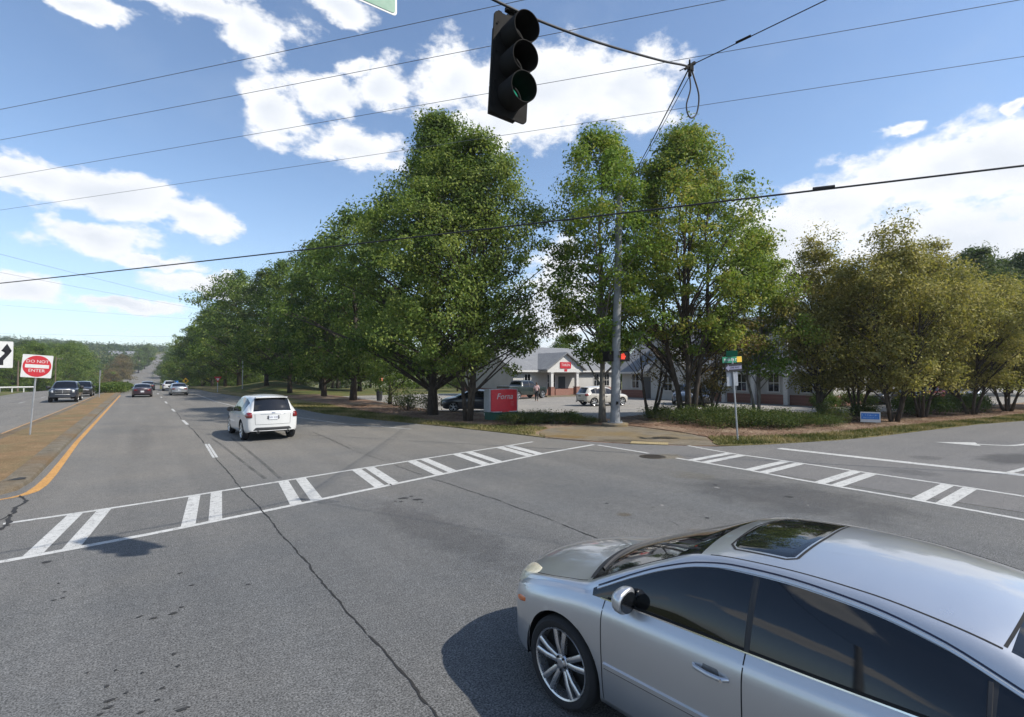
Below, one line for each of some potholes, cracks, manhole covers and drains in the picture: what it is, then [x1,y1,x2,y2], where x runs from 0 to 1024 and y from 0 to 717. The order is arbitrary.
crack [216,458,438,717]
crack [0,495,29,530]
